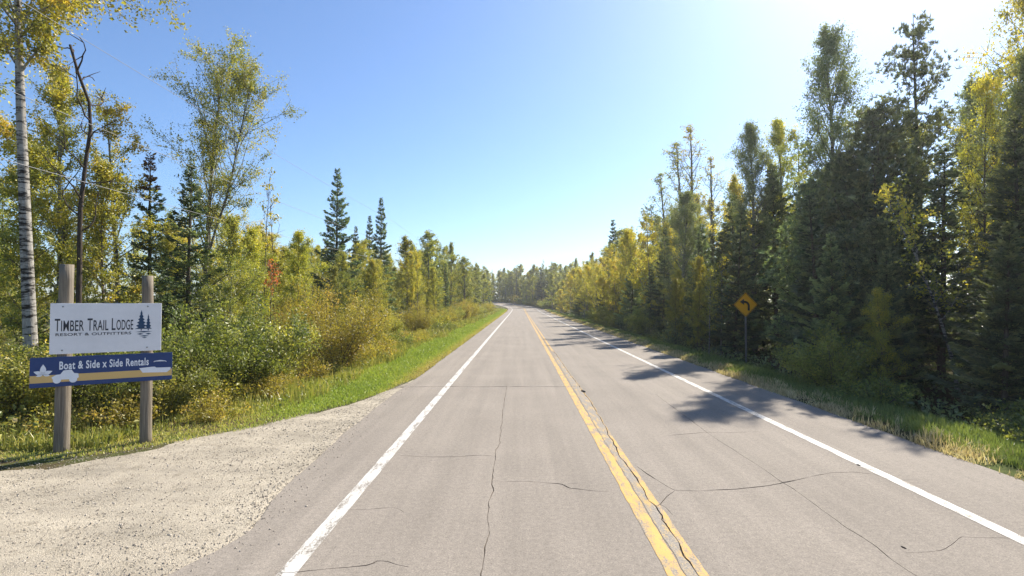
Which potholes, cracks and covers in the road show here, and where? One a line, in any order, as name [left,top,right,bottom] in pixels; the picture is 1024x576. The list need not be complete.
crack [638,395,982,576]
crack [400,386,603,576]
crack [291,561,407,573]
